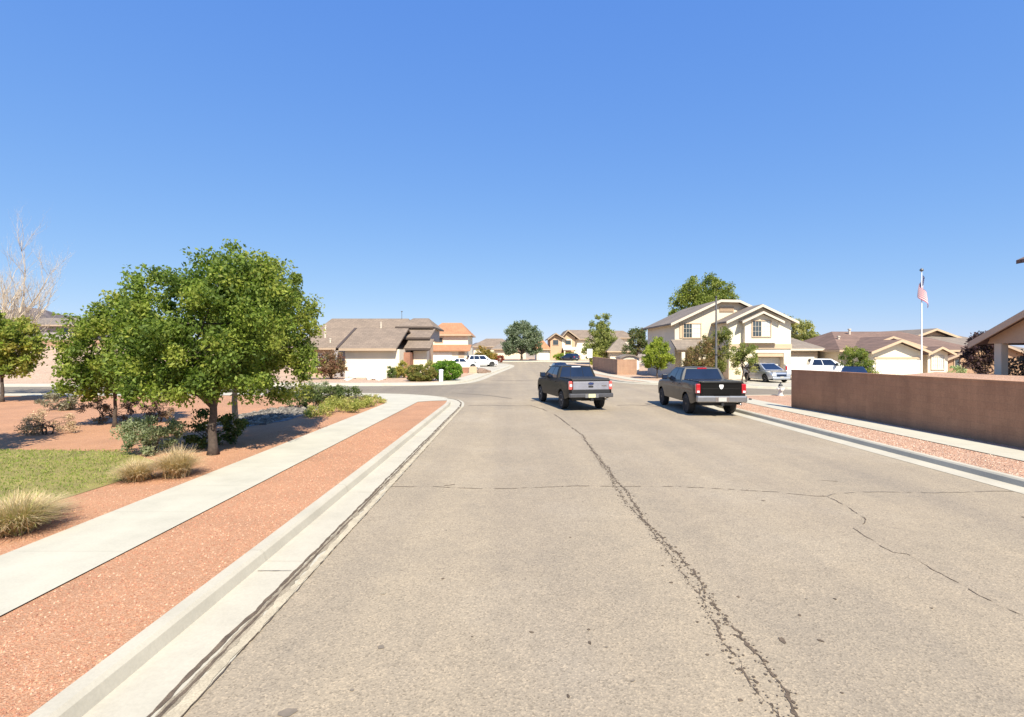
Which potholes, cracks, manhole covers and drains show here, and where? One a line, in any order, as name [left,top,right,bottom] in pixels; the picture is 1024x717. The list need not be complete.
crack [180,405,799,717]
crack [665,480,1022,615]
